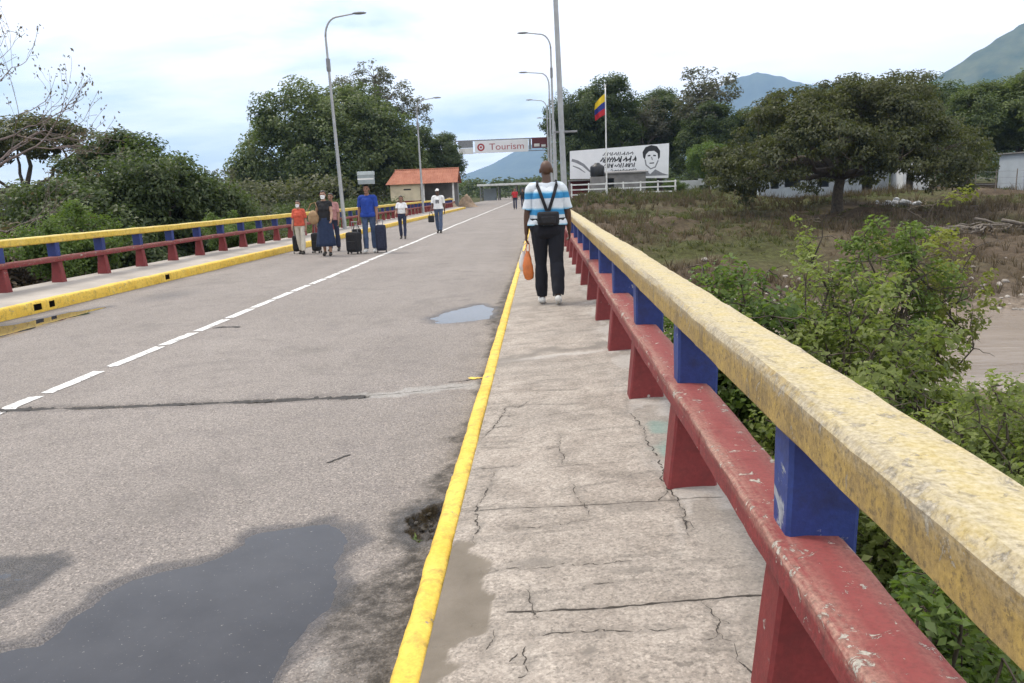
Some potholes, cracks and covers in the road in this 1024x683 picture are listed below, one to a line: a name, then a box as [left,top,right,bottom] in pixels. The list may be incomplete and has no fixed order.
crack [630,413,694,534]
pothole [368,495,446,557]
crack [506,560,632,570]
crack [486,591,678,678]
